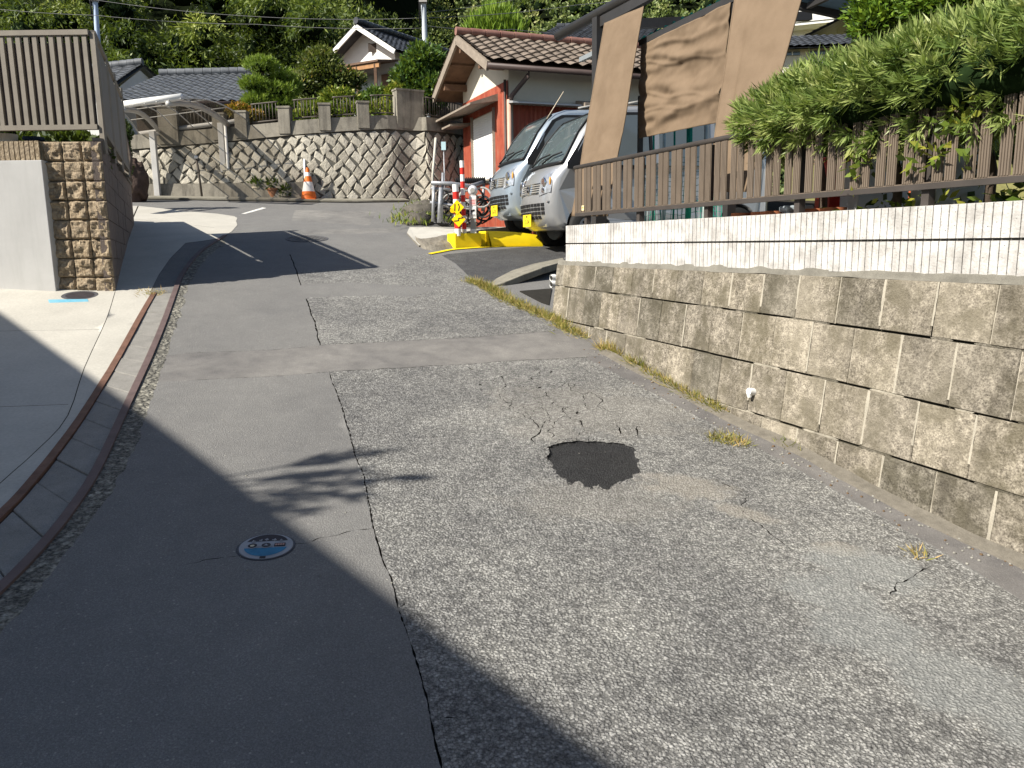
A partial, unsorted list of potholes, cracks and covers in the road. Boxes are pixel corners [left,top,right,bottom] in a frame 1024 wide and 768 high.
manhole cover [61,291,98,299]
crack [722,483,794,552]
manhole cover [236,534,296,561]
crack [470,365,610,442]
pothole [544,438,645,490]
